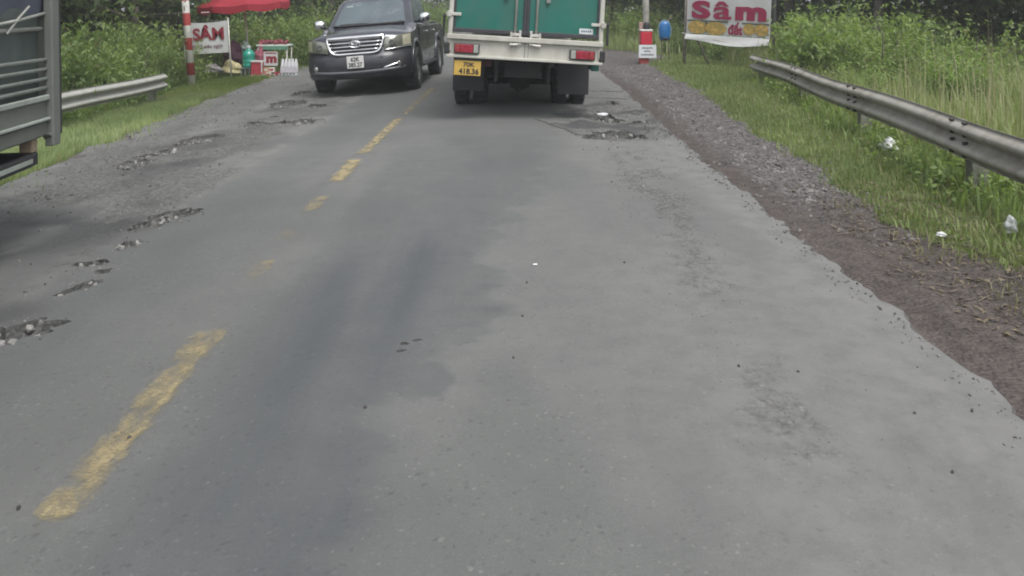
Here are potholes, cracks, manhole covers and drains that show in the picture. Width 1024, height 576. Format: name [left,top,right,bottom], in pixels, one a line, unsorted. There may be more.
pothole [53,279,103,296]
pothole [116,240,143,250]
pothole [270,100,314,108]
pothole [582,130,649,140]
pothole [0,317,71,346]
pothole [173,134,225,147]
pothole [71,259,110,267]
pothole [129,148,179,159]
pothole [593,111,623,124]
pothole [128,207,203,231]
pothole [114,159,153,171]
